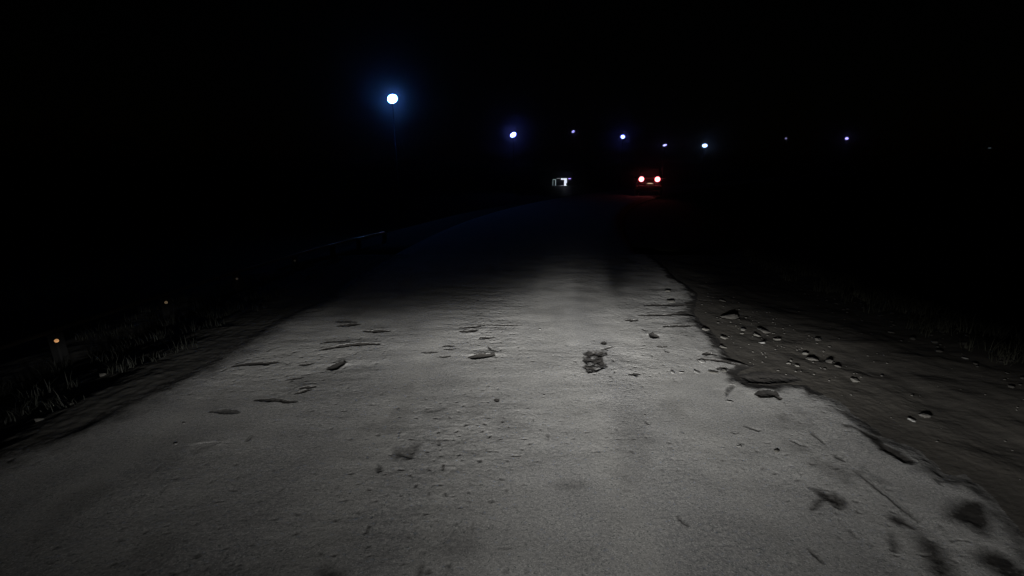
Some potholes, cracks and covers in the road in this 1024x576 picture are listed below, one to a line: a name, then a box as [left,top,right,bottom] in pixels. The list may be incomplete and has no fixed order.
pothole [937,496,1002,540]
pothole [582,350,607,373]
pothole [754,390,781,400]
crack [853,471,918,522]
pothole [807,486,851,511]
